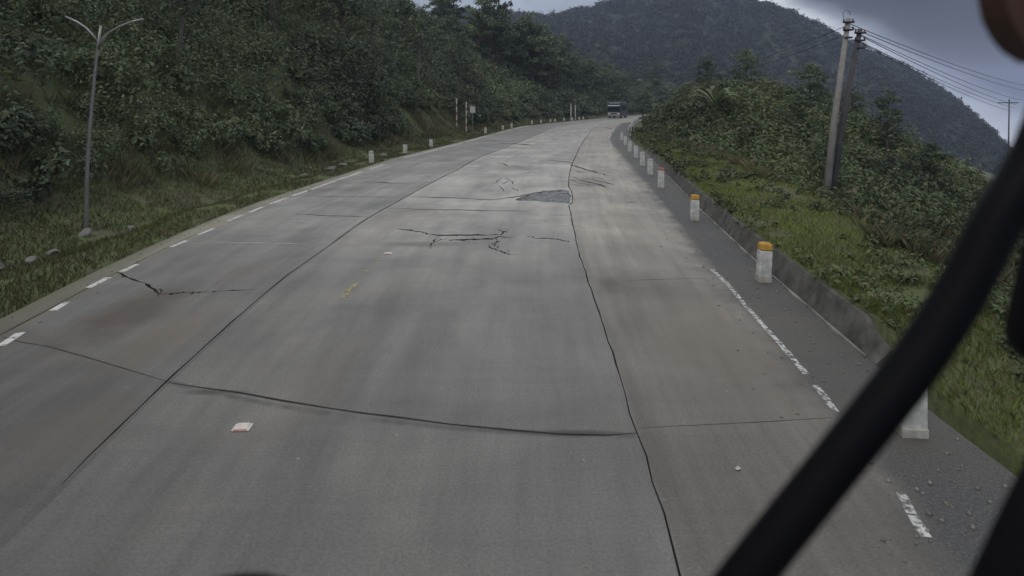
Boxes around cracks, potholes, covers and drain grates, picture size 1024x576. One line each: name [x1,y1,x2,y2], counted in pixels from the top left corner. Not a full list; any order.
crack [119,273,240,295]
crack [571,165,610,188]
crack [401,229,569,255]
